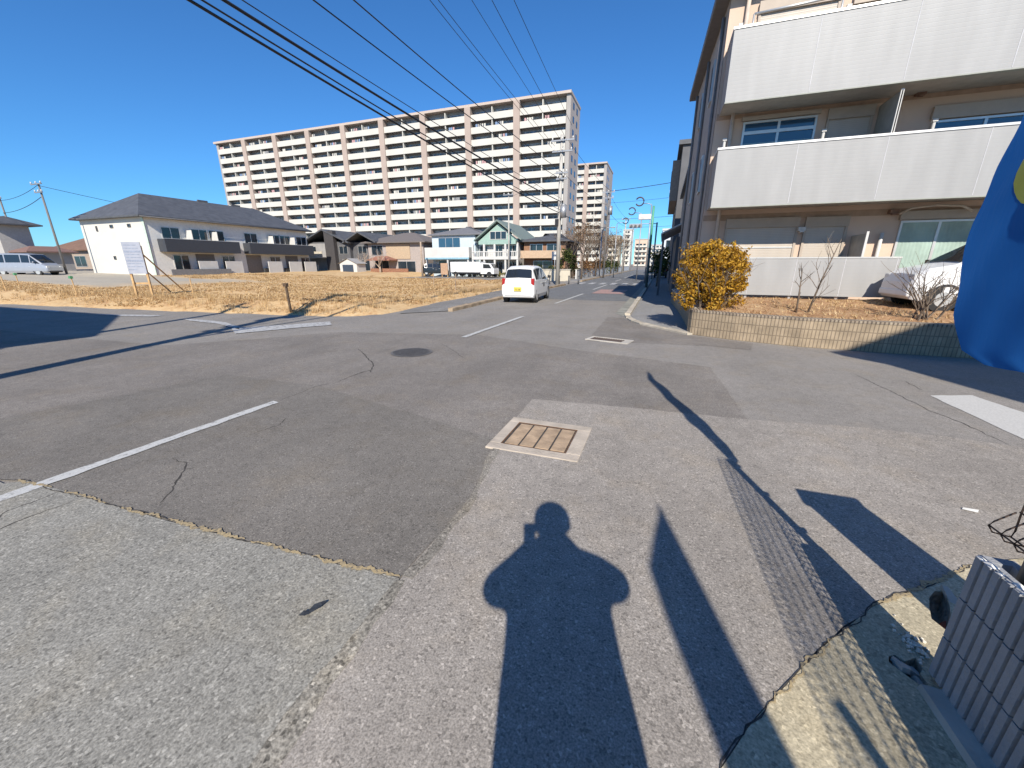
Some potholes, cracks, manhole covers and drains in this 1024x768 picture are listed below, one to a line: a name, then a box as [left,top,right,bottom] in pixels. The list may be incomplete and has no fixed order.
drain grate [585,336,634,344]
crack [857,375,1011,446]
manhole cover [390,348,432,357]
crack [160,458,194,503]
